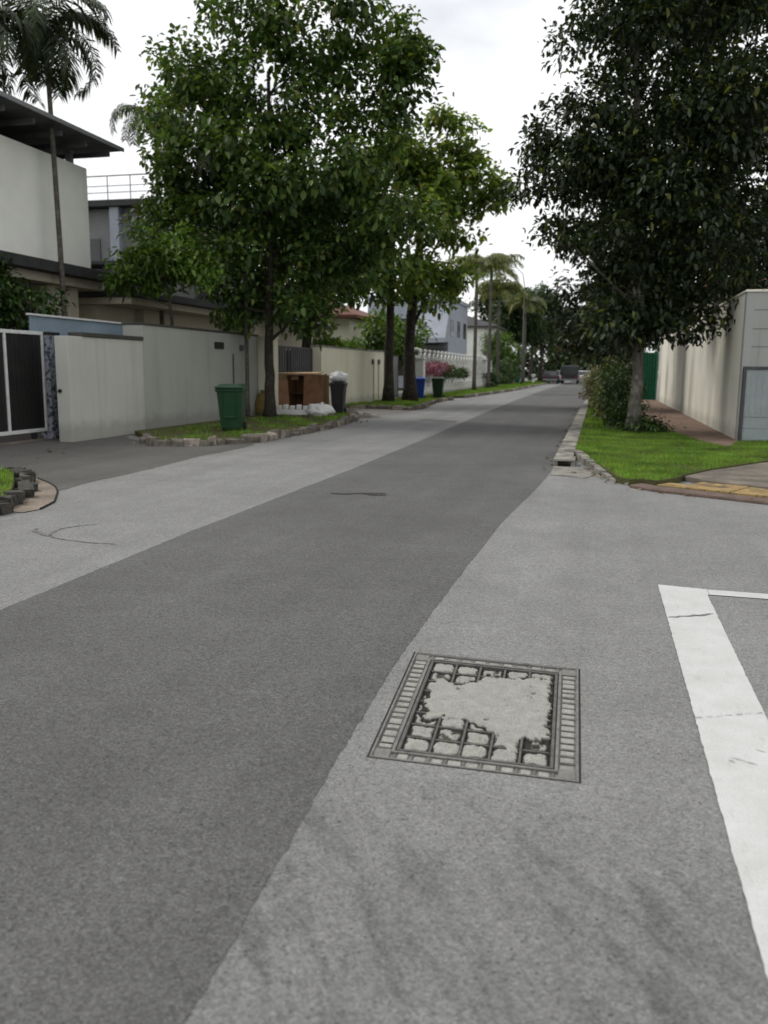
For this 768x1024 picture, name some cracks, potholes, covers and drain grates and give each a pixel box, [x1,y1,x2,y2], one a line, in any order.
crack [32,524,114,544]
drain grate [553,456,576,467]
manhole cover [367,652,581,784]
